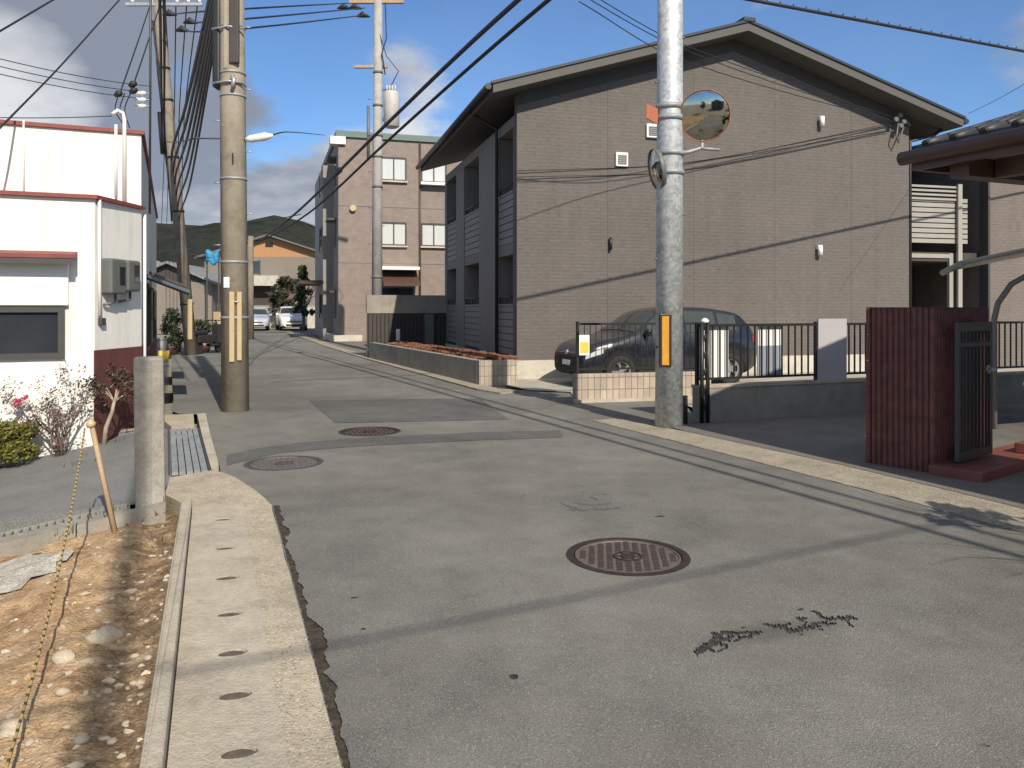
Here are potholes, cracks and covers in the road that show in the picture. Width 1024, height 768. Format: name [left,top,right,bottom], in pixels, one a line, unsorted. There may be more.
crack [561,494,619,512]
crack [693,608,859,657]
manhole cover [243,455,324,471]
manhole cover [338,427,401,436]
drain grate [168,428,211,477]
manhole cover [566,537,691,576]
crack [273,506,350,768]
